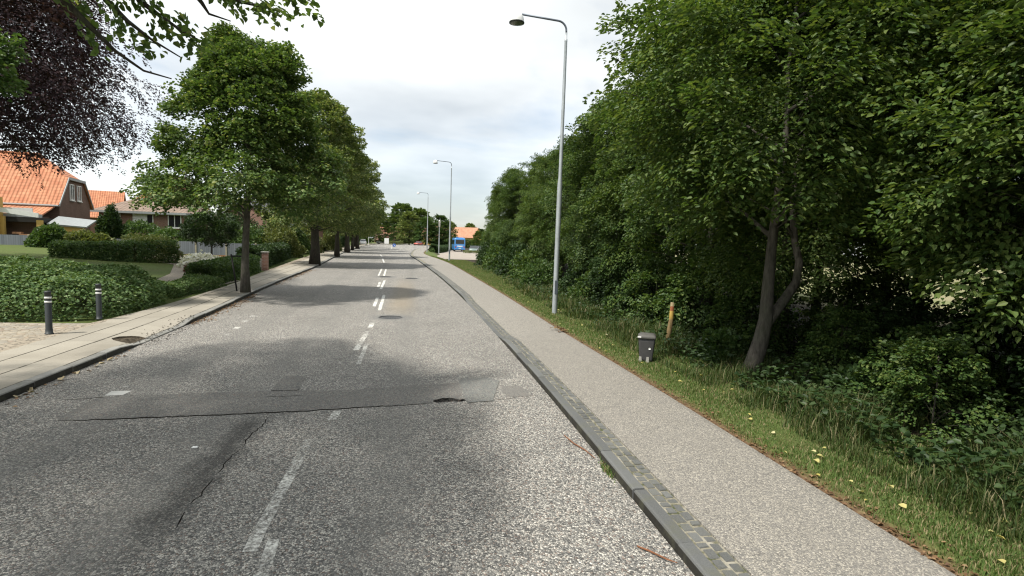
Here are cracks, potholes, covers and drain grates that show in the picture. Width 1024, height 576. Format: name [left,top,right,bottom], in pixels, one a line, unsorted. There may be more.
crack [66,396,427,528]
